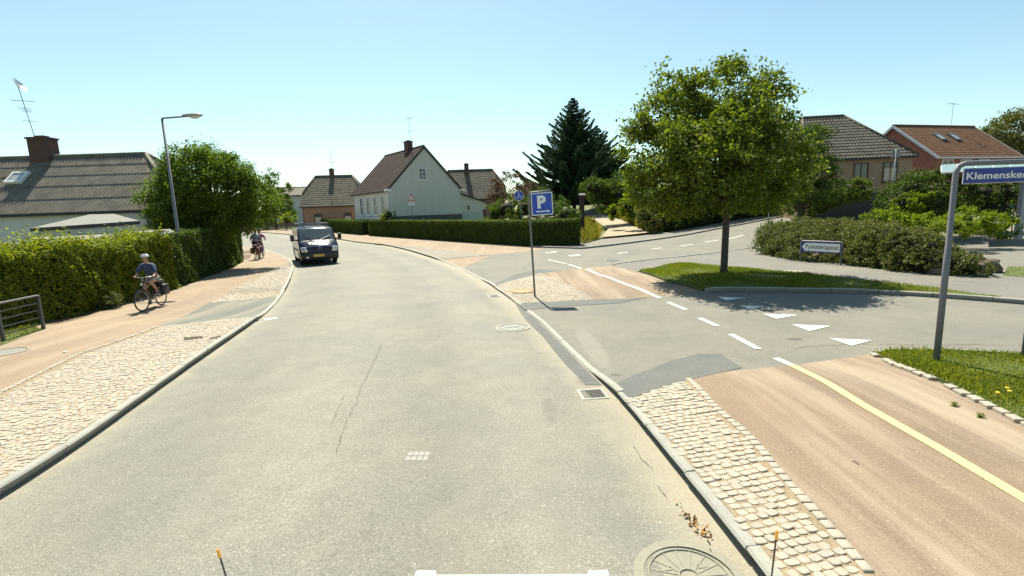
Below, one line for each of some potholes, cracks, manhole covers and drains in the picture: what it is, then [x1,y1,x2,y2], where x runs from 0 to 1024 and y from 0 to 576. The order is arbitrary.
manhole cover [495,323,531,332]
drain grate [576,388,610,400]
manhole cover [633,540,745,576]
